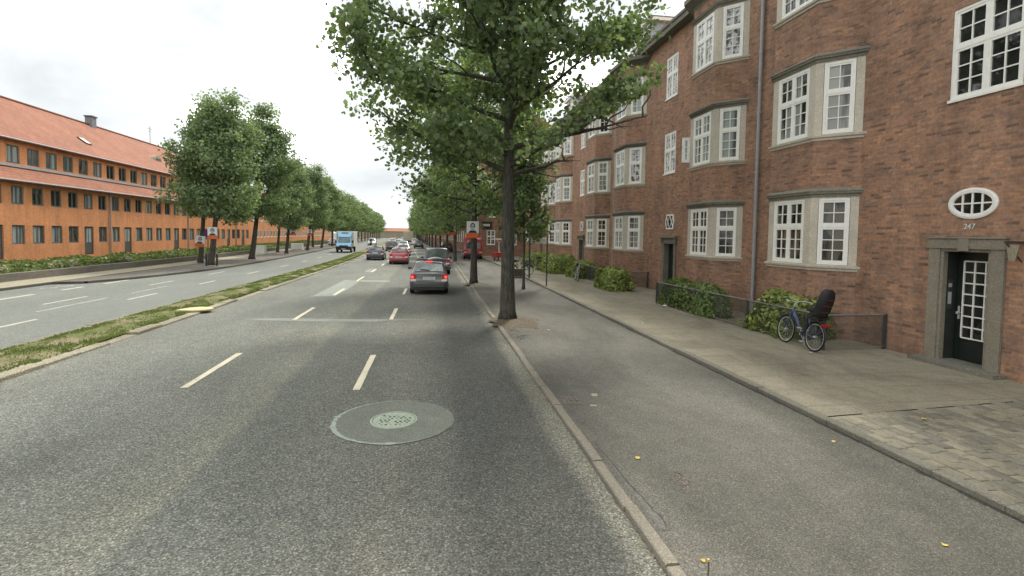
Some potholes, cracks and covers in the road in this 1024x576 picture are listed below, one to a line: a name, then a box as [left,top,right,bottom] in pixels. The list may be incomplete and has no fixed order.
crack [595,443,667,528]
manhole cover [370,411,417,429]
